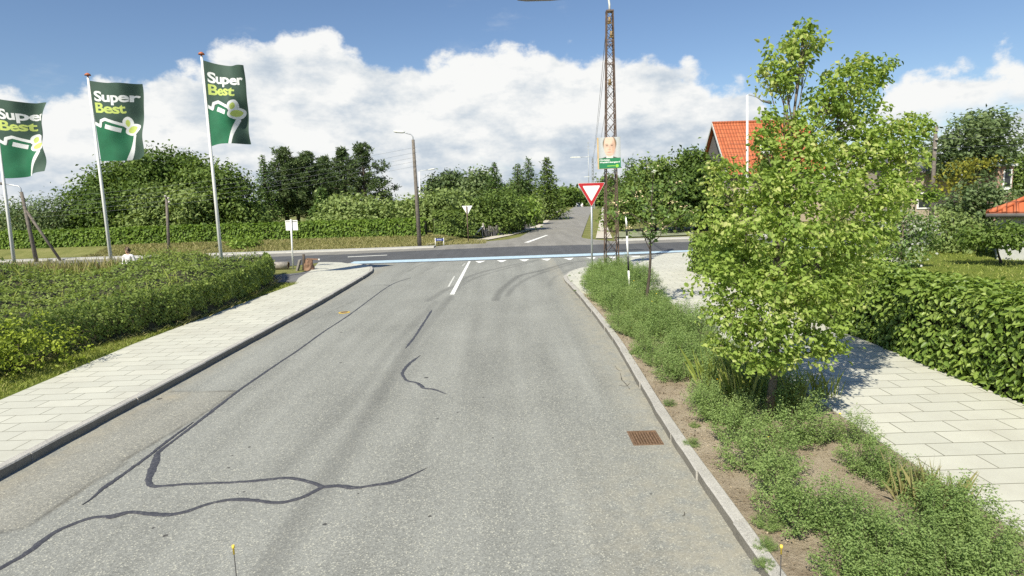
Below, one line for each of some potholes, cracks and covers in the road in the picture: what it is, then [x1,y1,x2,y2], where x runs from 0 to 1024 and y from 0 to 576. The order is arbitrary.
drain grate [627,430,664,446]
